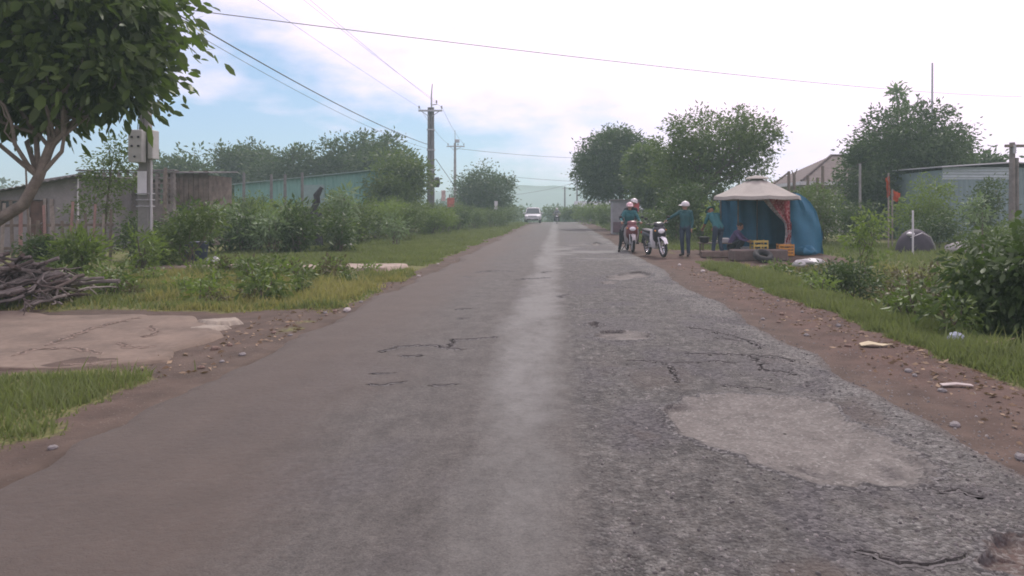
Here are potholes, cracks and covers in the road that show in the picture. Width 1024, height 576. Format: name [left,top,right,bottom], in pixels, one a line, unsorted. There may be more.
crack [854,550,968,570]
pothole [965,527,1024,576]
crack [368,336,497,386]
crack [628,327,797,390]
